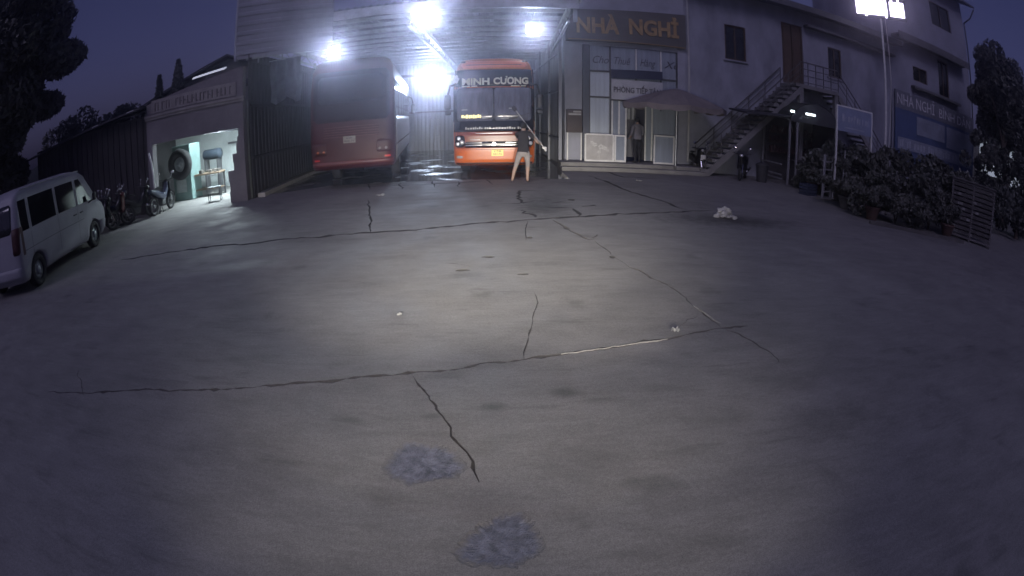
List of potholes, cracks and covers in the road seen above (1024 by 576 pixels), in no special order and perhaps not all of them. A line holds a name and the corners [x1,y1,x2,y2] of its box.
crack [51,172,779,482]
